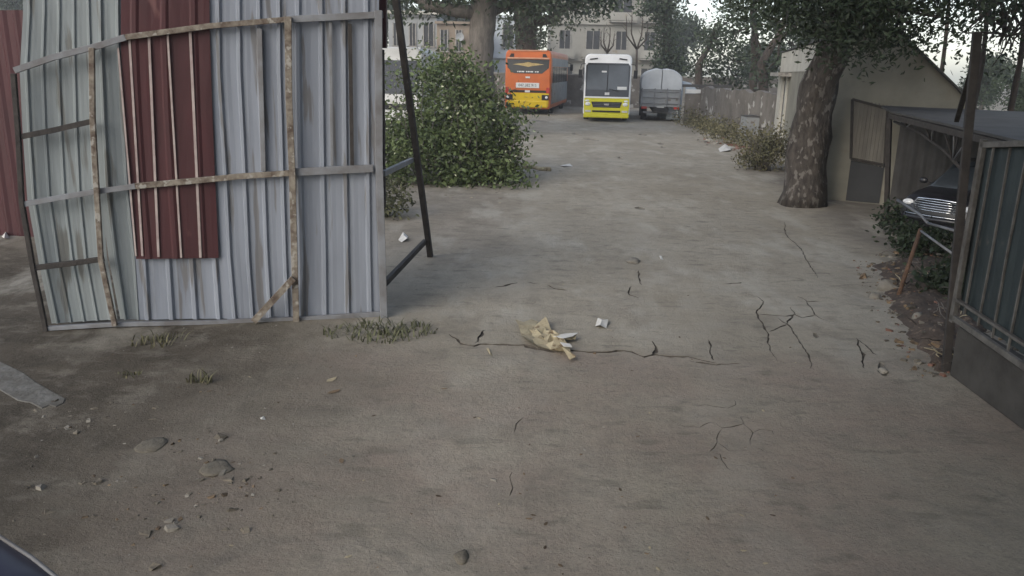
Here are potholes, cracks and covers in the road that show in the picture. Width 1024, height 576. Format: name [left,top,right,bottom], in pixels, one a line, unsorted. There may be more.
crack [690,341,739,365]
crack [728,282,834,368]
crack [784,222,818,277]
crack [856,338,874,368]
crack [670,400,774,472]
